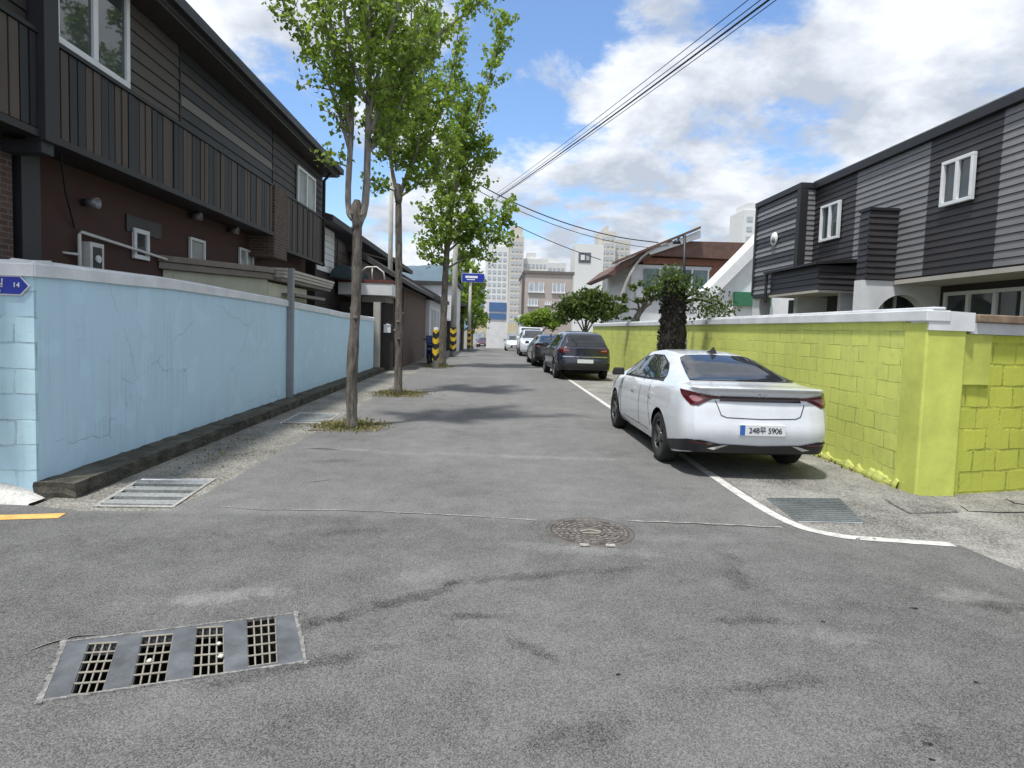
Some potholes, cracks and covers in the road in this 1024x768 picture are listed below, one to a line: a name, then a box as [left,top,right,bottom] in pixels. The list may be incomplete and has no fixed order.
drain grate [33,611,310,706]
manhole cover [545,517,635,547]
